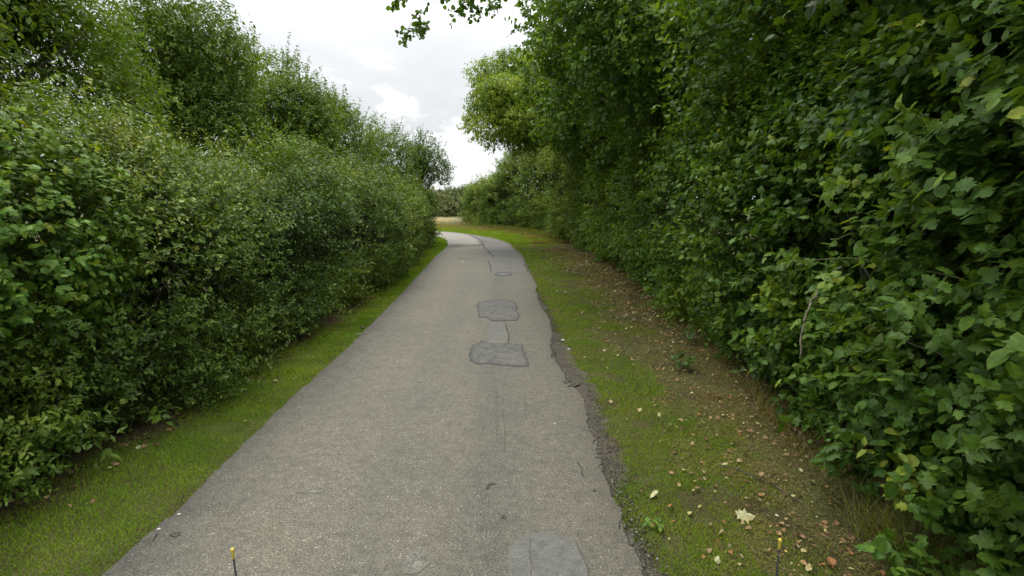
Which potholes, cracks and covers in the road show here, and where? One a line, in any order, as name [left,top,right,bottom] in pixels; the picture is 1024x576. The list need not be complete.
crack [451,236,494,271]
crack [577,426,603,477]
